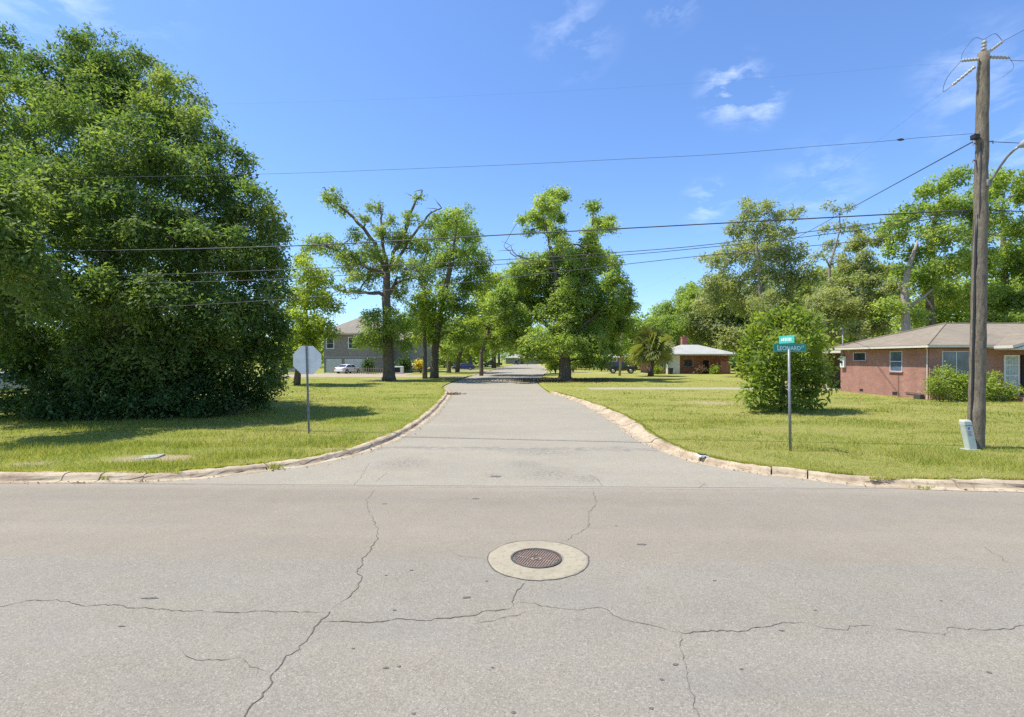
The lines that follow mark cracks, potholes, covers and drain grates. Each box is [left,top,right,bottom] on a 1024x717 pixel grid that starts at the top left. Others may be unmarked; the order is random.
crack [5,462,675,717]
manhole cover [510,548,562,569]
crack [675,622,1024,717]
